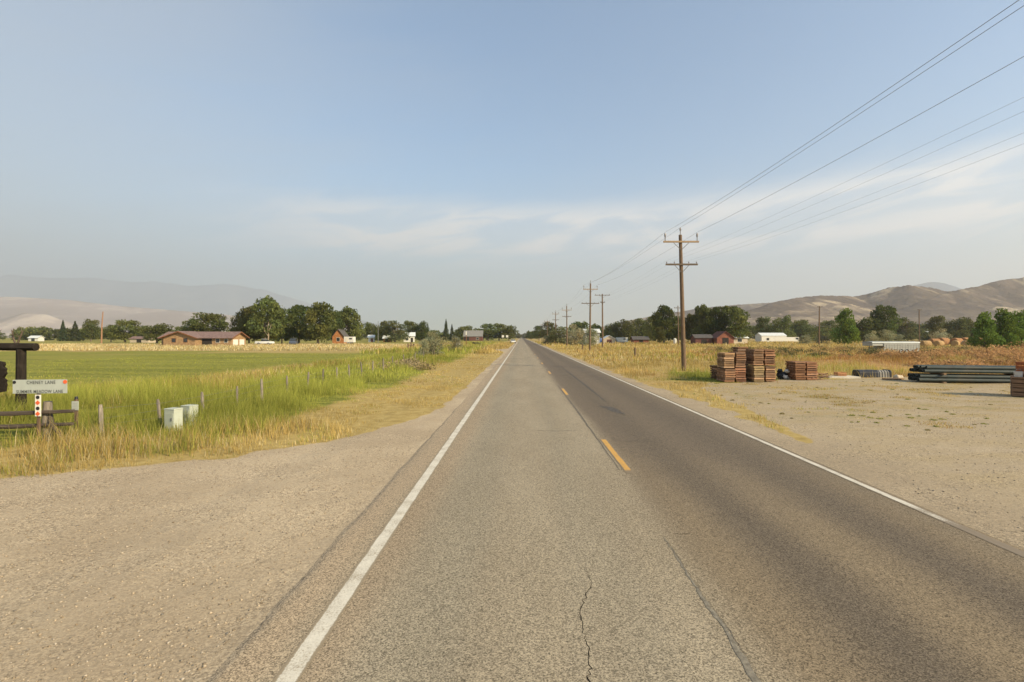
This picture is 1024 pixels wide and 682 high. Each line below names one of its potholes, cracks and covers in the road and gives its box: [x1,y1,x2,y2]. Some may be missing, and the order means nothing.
crack [579,566,592,682]
